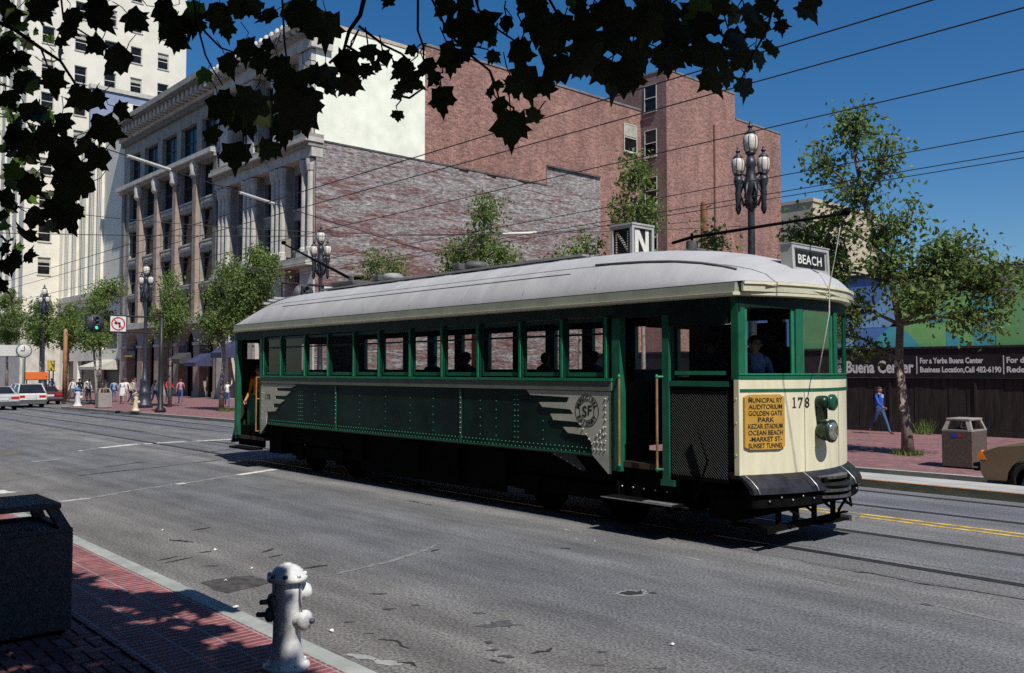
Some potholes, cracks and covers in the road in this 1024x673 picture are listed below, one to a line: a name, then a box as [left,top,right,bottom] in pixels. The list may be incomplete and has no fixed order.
crack [378,639,416,666]
crack [165,527,219,566]
